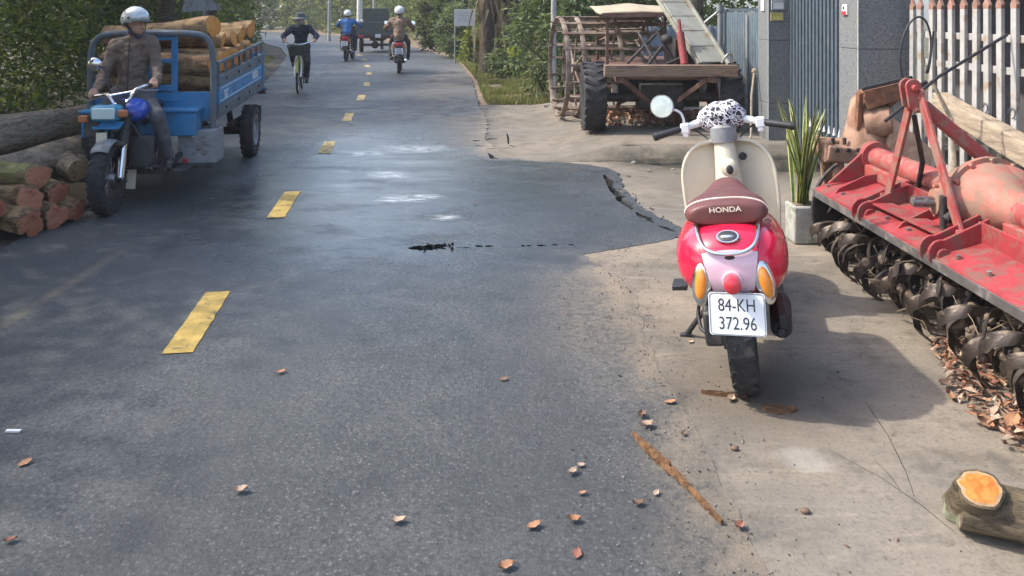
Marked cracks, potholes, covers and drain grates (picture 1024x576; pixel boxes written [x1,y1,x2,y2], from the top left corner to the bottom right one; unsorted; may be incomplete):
crack [605,173,679,228]
